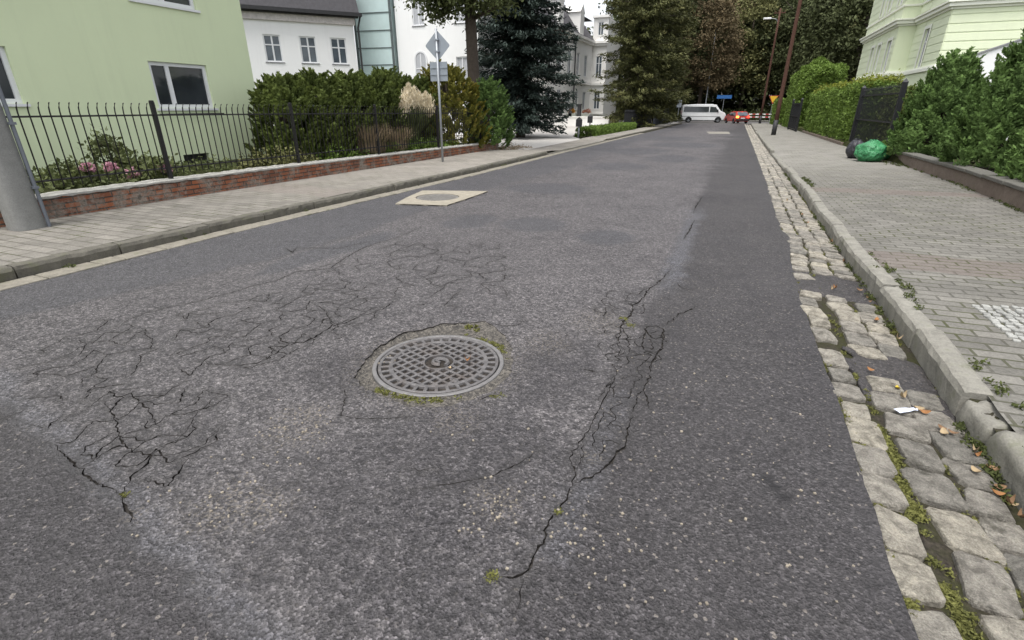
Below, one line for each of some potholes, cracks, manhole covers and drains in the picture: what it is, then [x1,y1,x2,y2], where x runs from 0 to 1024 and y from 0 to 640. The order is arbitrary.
manhole cover [372,335,504,398]
crack [113,234,511,328]
crack [407,452,538,490]
crack [25,320,157,384]
crack [492,271,695,611]
crack [340,390,407,419]
crack [176,280,397,376]
crack [10,376,228,523]
manhole cover [395,190,488,206]
